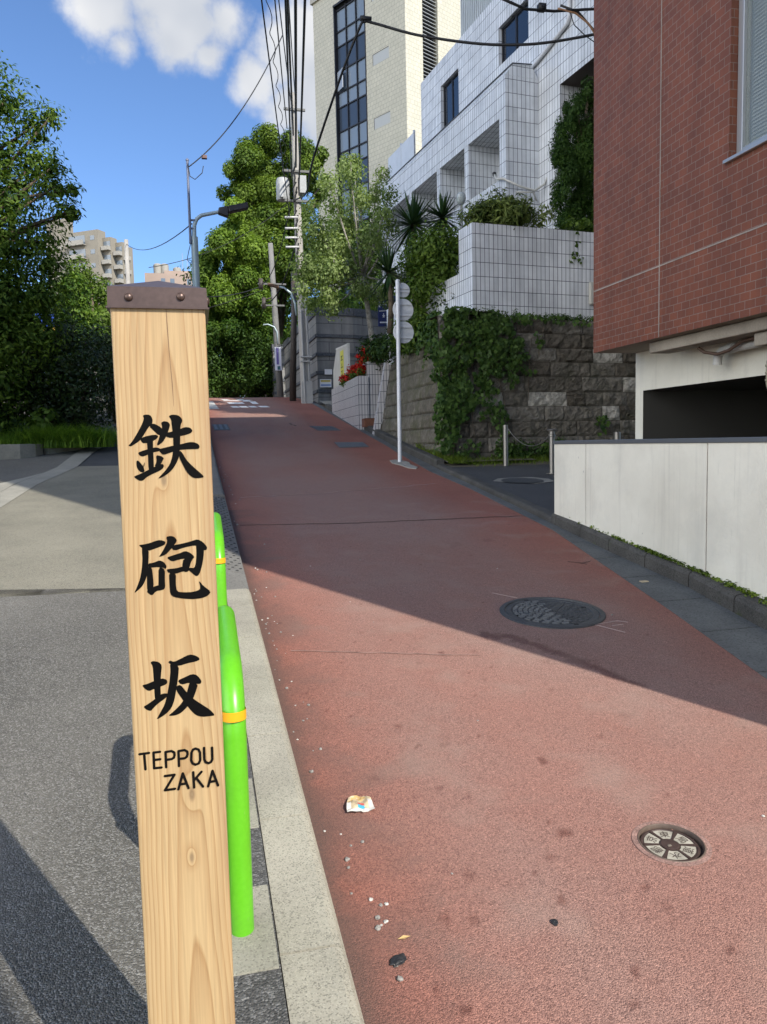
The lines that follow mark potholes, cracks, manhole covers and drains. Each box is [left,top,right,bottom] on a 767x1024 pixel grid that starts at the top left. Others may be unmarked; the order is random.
utility cover [632,821,712,867]
manhole cover [500,597,606,629]
